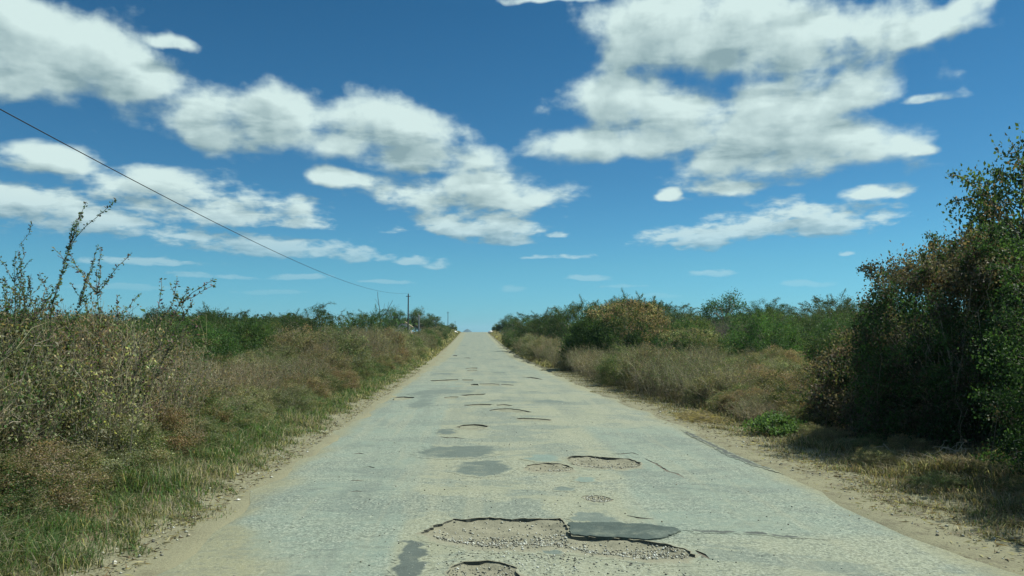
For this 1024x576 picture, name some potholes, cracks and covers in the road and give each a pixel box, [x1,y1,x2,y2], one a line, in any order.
crack [623,453,683,477]
pothole [565,455,648,472]
pothole [413,517,702,567]
pothole [520,463,579,474]
pothole [581,495,614,503]
pothole [443,560,527,576]
